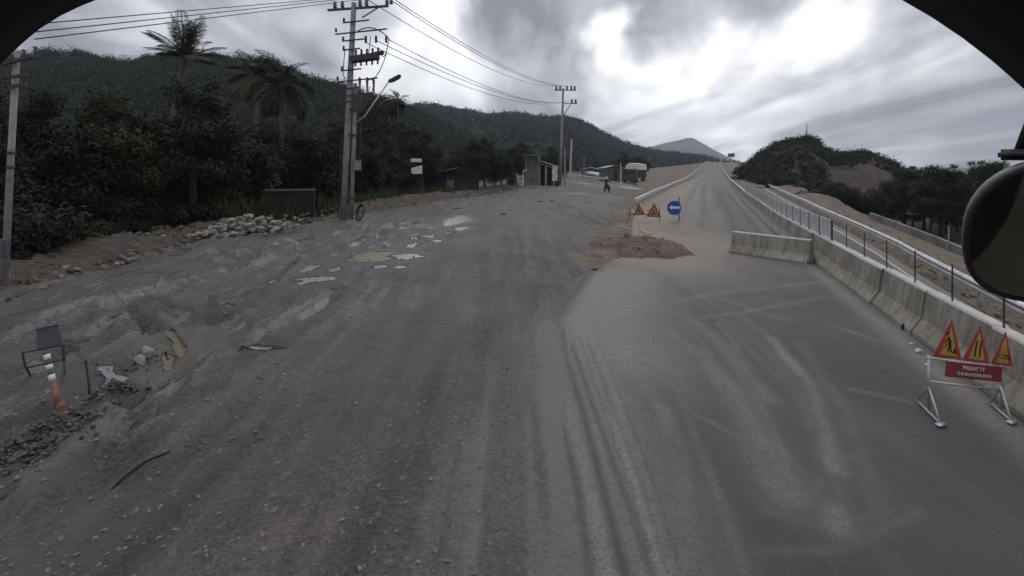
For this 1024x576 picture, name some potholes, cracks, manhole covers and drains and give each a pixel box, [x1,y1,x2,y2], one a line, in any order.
pothole [163,326,187,360]
pothole [341,251,400,263]
pothole [161,350,175,372]
pothole [91,363,129,392]
